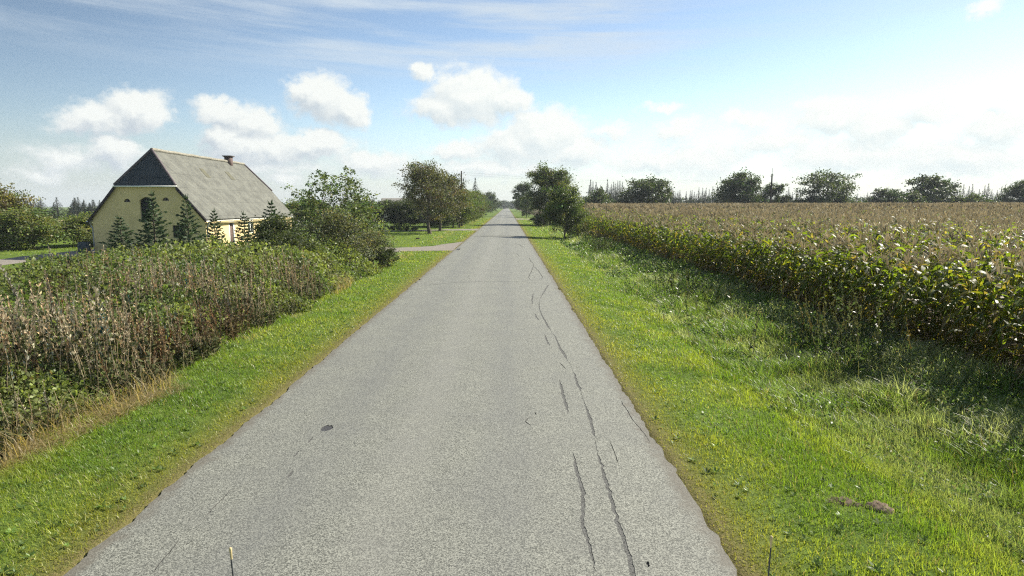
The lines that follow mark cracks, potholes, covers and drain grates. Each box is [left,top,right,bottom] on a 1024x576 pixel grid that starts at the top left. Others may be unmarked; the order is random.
crack [518,244,650,576]
